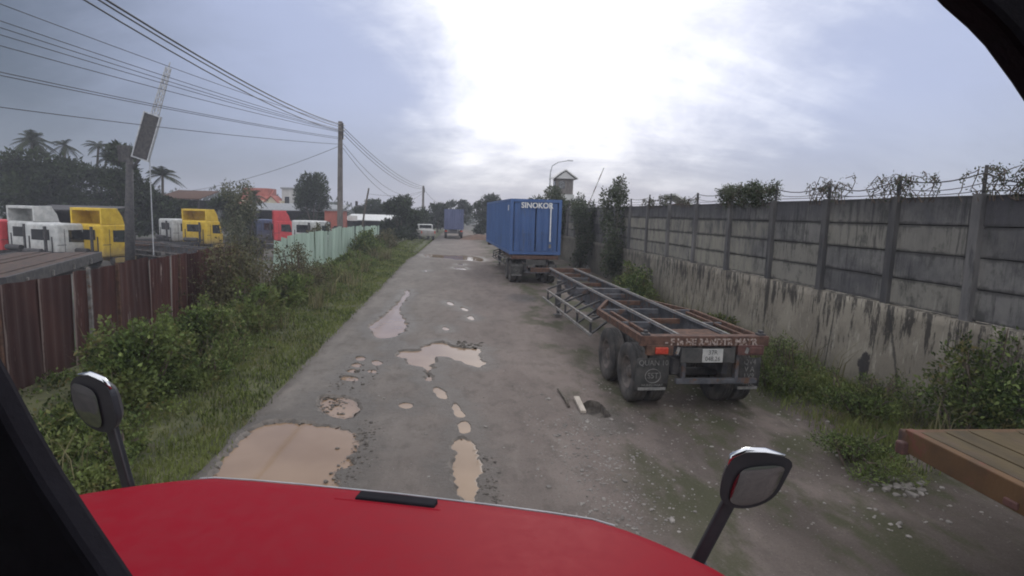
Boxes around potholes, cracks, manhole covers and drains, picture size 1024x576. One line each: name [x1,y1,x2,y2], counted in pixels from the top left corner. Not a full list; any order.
pothole [367,290,411,338]
pothole [432,386,448,399]
pothole [423,254,484,262]
pothole [314,393,363,419]
pothole [395,341,487,381]
pothole [457,420,472,434]
pothole [451,402,466,418]
pothole [201,418,363,488]
pothole [583,400,611,418]
pothole [447,436,485,502]
